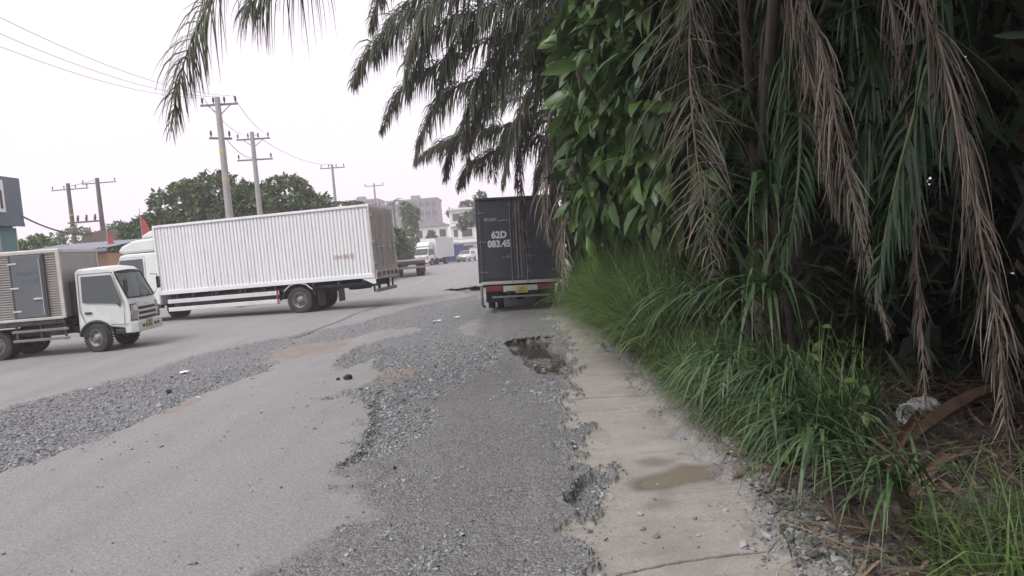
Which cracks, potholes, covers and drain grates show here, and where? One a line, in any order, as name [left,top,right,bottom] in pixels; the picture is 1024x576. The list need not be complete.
pothole [557,462,620,521]
pothole [499,335,580,376]
crack [618,537,783,576]
